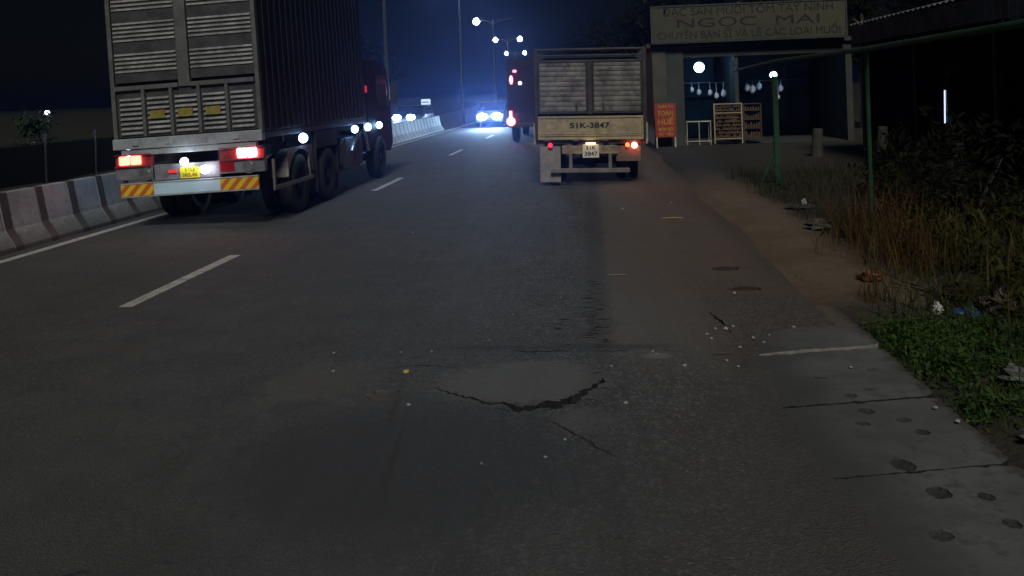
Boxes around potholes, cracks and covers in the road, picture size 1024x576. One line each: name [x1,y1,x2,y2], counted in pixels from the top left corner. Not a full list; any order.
pothole [925,486,953,499]
pothole [889,459,916,474]
pothole [977,492,996,501]
pothole [928,529,955,542]
pothole [1002,519,1023,529]
crack [379,356,617,457]
